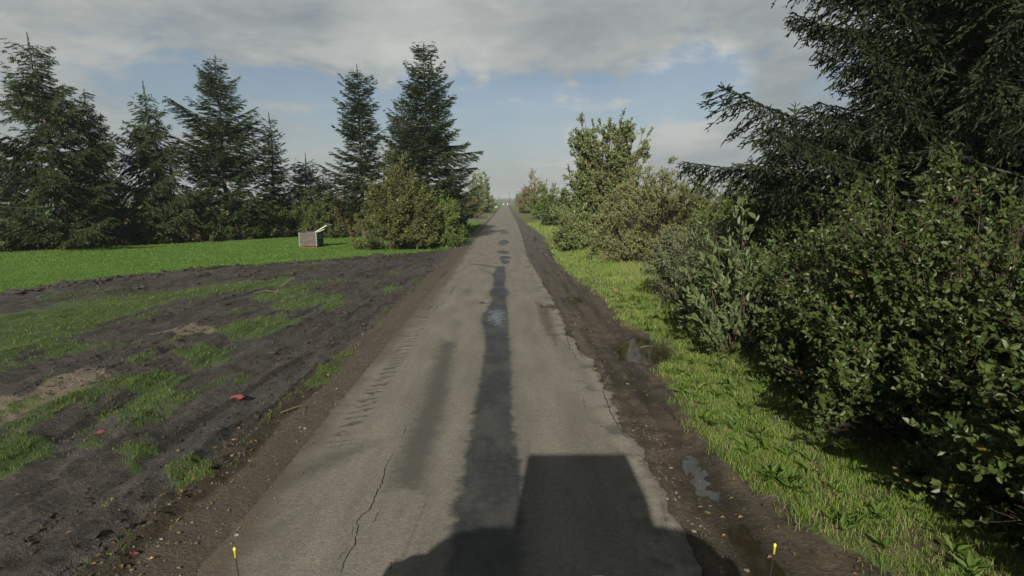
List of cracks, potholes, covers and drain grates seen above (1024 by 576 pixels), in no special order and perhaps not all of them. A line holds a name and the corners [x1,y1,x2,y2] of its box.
crack [337,456,391,576]
